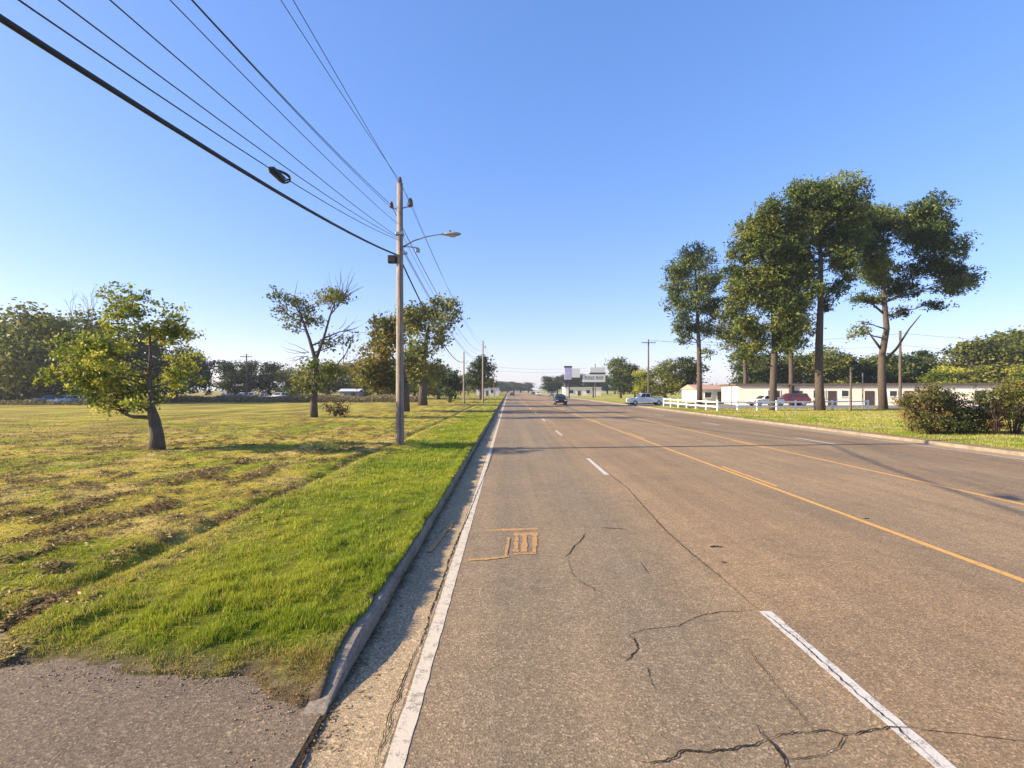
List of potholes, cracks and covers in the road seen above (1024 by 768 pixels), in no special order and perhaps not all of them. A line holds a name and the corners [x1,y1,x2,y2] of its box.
crack [546,422,1024,768]
